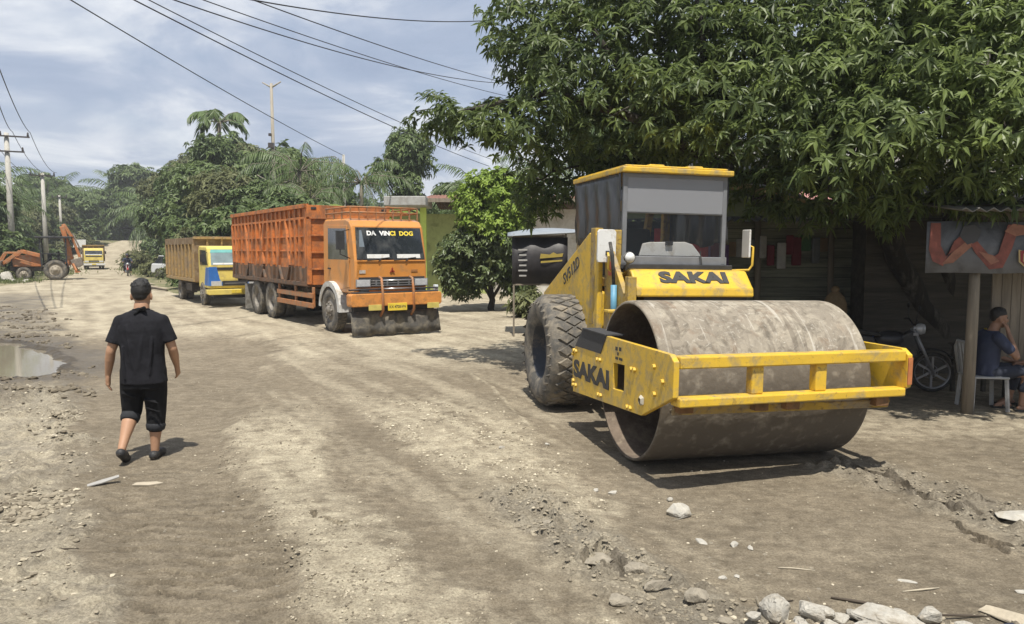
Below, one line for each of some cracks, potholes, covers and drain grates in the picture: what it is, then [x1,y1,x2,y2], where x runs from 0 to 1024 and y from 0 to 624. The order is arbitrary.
crack [850,461,1015,554]
pothole [0,338,80,379]
